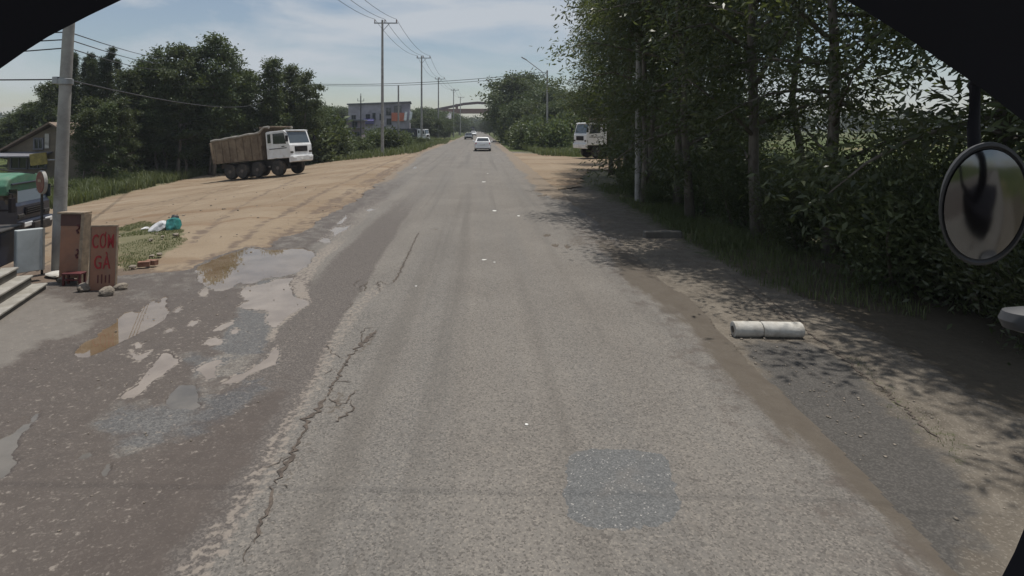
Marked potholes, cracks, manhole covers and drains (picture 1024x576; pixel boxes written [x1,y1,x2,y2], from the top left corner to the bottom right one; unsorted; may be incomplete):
crack [243,234,418,560]
